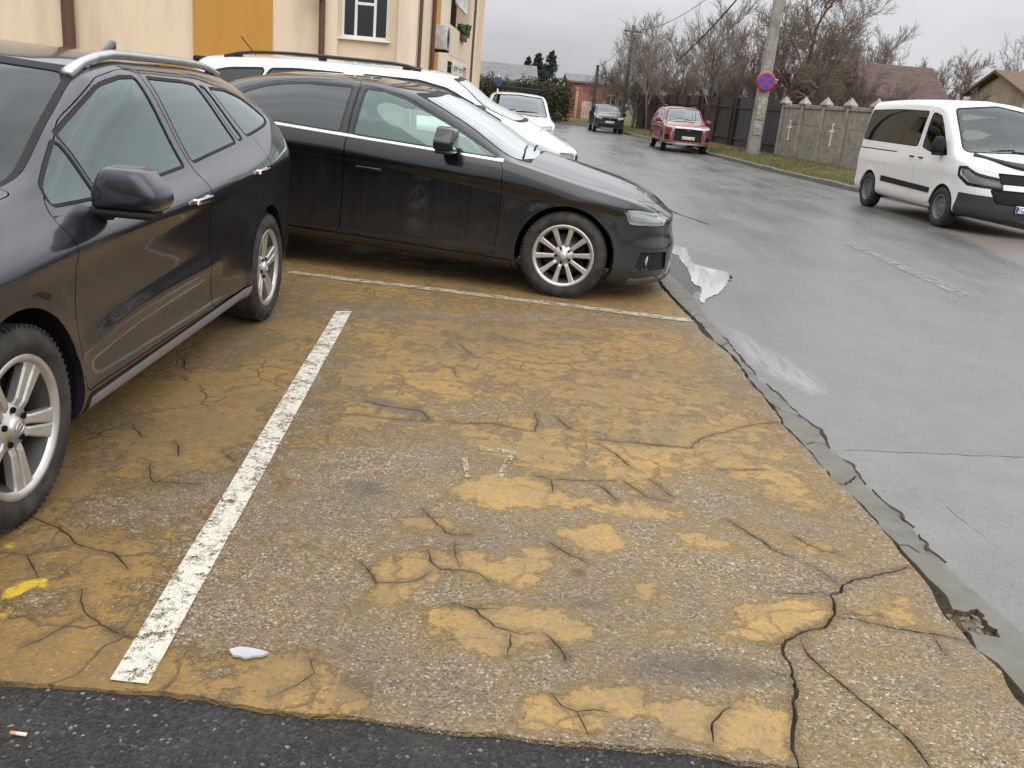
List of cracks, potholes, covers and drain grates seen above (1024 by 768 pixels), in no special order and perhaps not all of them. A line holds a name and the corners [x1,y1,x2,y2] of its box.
crack [45,593,112,638]
pothole [940,608,1000,638]
crack [550,542,586,562]
crack [654,277,1024,768]
crack [358,512,490,583]
crack [27,517,128,575]
crack [466,607,512,654]
